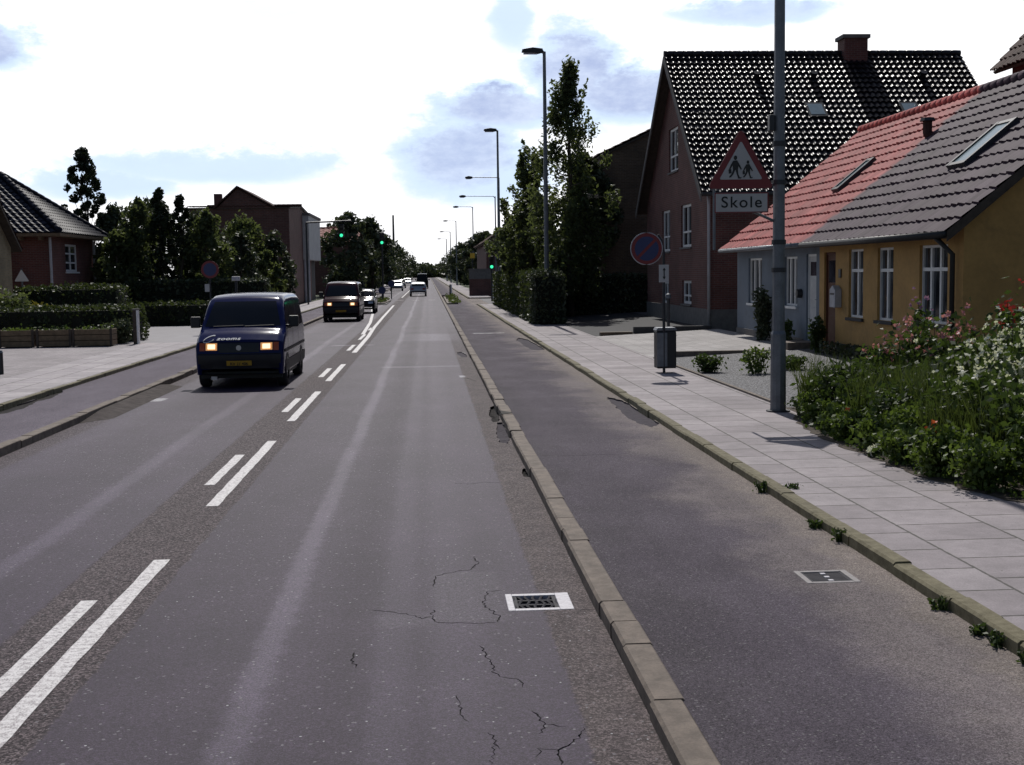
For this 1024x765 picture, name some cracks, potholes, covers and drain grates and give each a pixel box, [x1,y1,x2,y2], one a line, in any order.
pothole [517,338,544,350]
drain grate [505,592,574,611]
crack [374,558,501,623]
crack [480,646,524,687]
pothole [607,397,660,427]
crack [533,712,586,765]
pothole [496,422,509,444]
pothole [489,406,500,422]
